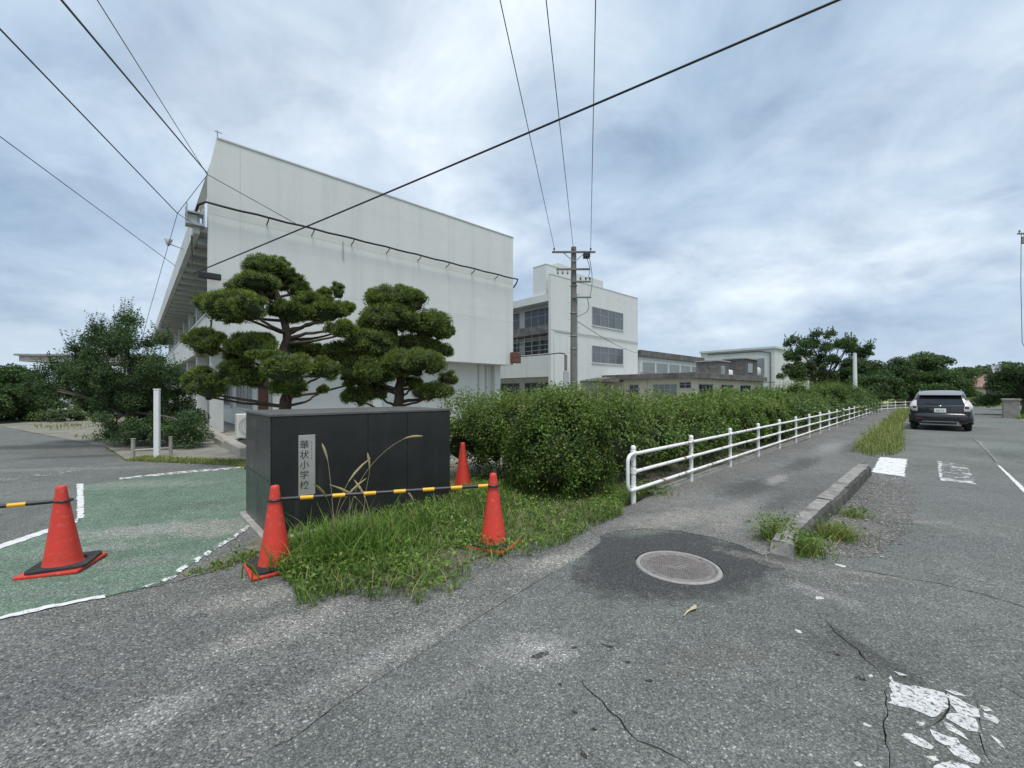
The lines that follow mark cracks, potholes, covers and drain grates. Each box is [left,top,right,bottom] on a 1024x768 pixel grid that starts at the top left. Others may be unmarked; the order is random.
crack [818,613,890,768]
crack [581,678,694,768]
crack [971,705,993,765]
crack [921,687,950,729]
manhole cover [635,551,724,585]
